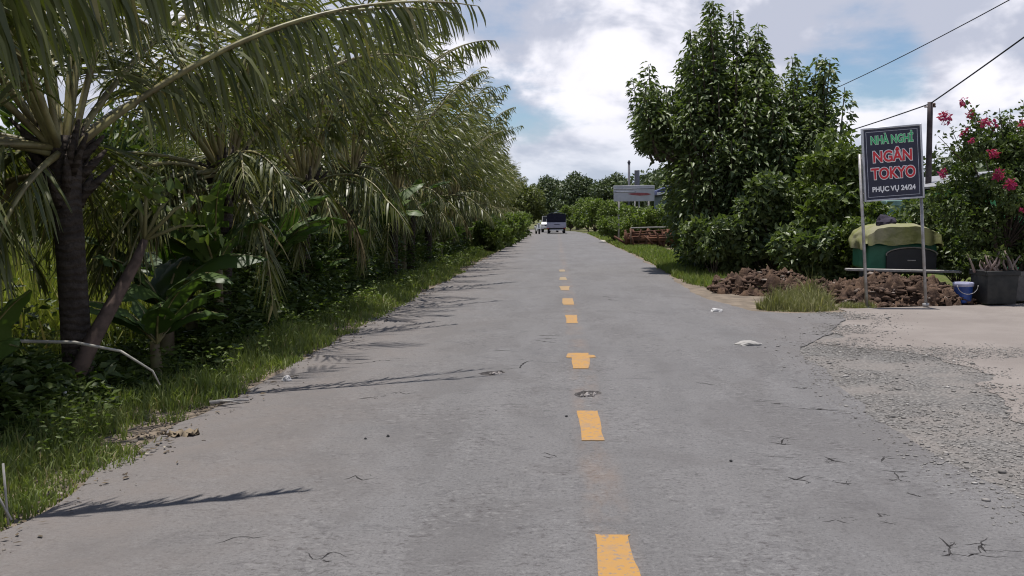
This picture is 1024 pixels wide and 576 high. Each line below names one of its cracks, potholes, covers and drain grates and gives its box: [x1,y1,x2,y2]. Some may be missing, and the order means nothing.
crack [881,456,921,497]
crack [306,552,346,564]
crack [939,537,1020,558]
crack [769,436,851,485]
